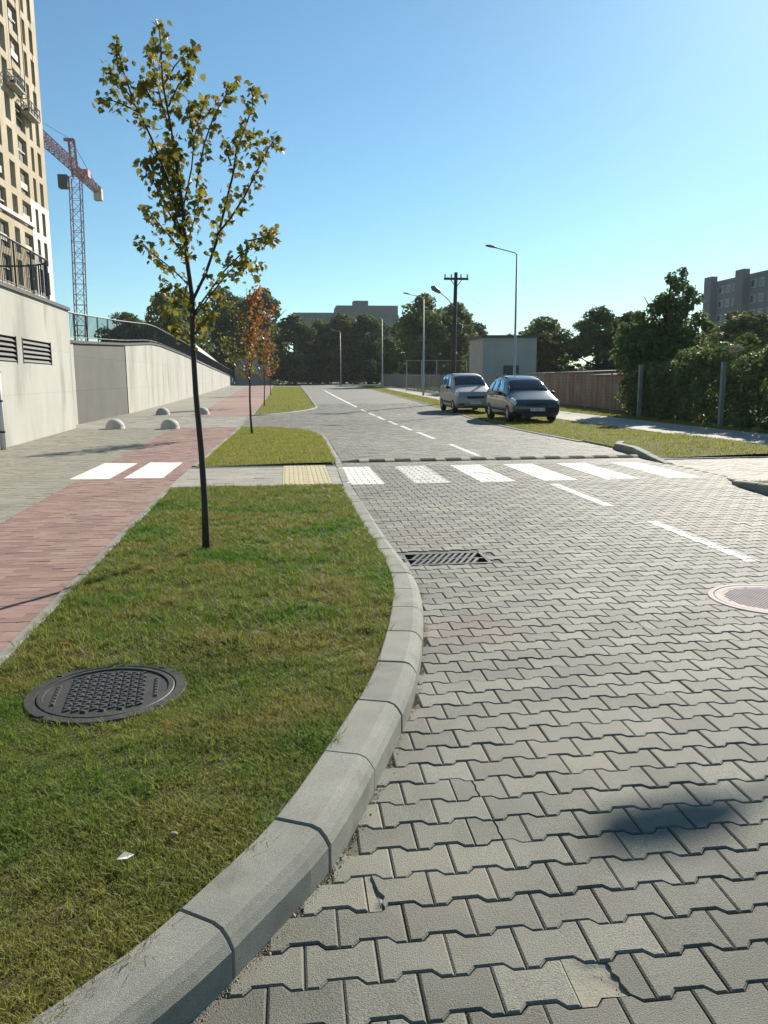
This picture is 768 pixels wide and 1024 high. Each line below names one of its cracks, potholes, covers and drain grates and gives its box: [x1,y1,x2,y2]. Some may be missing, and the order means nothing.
manhole cover [23,663,186,726]
manhole cover [707,584,768,614]
drain grate [400,552,493,566]
